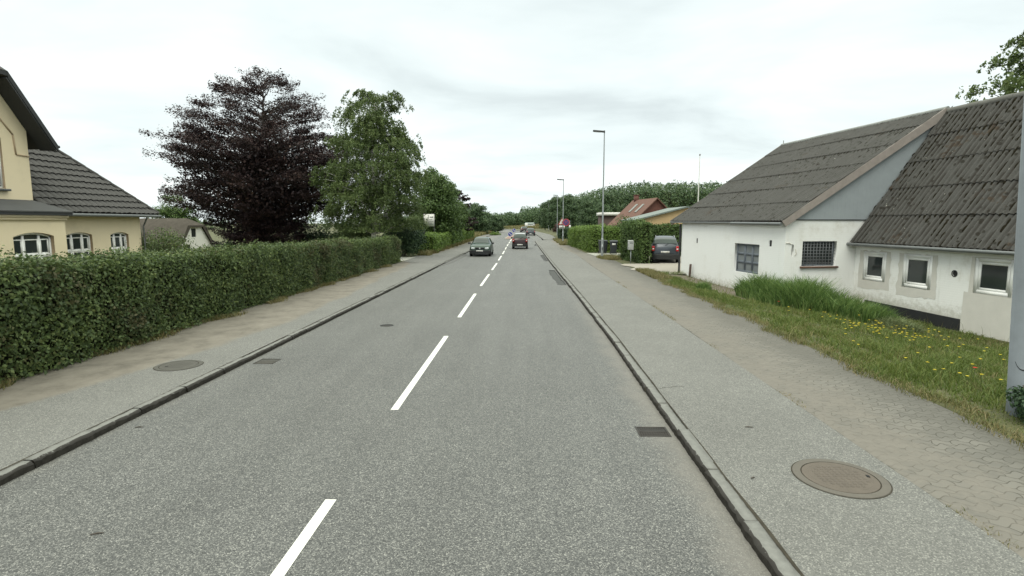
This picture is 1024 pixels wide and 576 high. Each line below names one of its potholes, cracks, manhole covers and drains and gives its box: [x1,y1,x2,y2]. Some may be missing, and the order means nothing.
manhole cover [791,459,893,499]
drain grate [635,426,672,437]
manhole cover [153,360,204,371]
